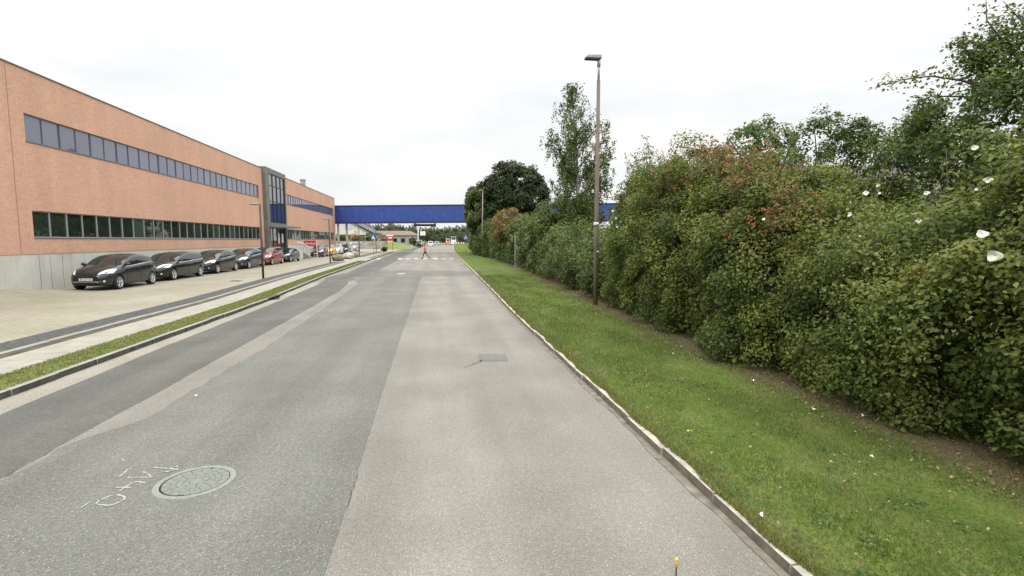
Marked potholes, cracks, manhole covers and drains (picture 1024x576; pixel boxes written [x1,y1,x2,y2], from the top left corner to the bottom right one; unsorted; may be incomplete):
manhole cover [151,465,237,500]
